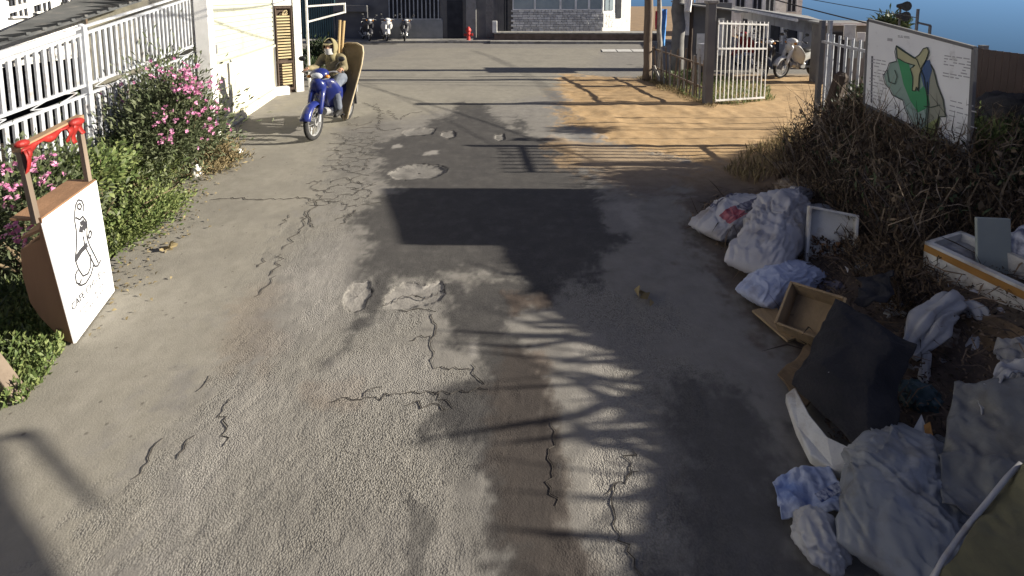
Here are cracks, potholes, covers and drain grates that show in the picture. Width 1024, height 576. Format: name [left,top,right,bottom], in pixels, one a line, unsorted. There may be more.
crack [212,103,417,297]
pothole [343,281,372,312]
crack [331,291,486,410]
crack [546,423,559,502]
pothole [384,282,445,309]
pothole [403,128,436,136]
crack [605,449,643,576]
